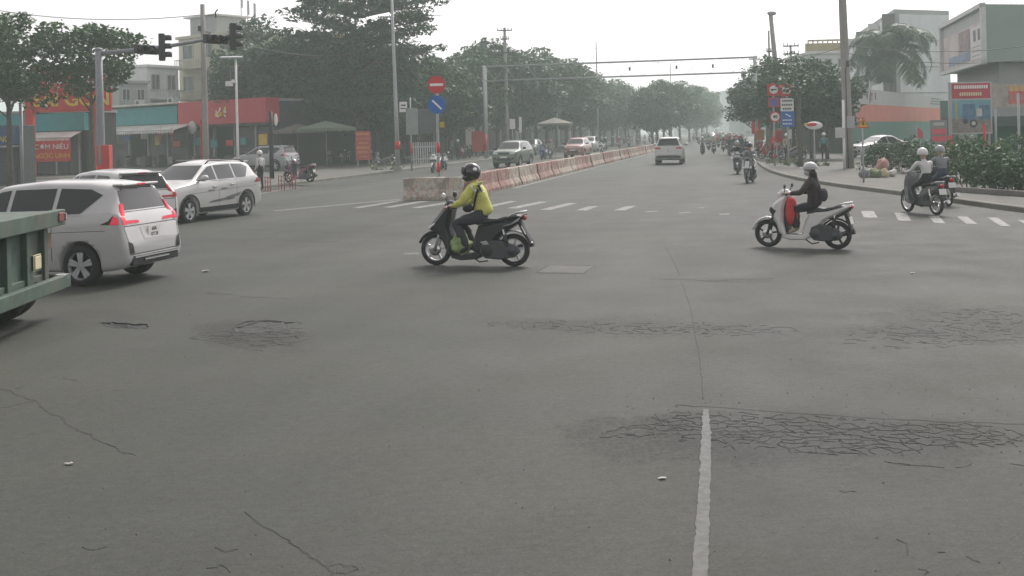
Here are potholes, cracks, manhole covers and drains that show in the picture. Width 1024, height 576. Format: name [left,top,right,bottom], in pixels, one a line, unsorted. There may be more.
crack [850,309,1023,349]
manhole cover [535,265,598,274]
crack [600,411,1024,468]
crack [82,511,359,576]
pothole [231,320,296,336]
crack [0,387,134,455]
crack [481,320,795,338]
